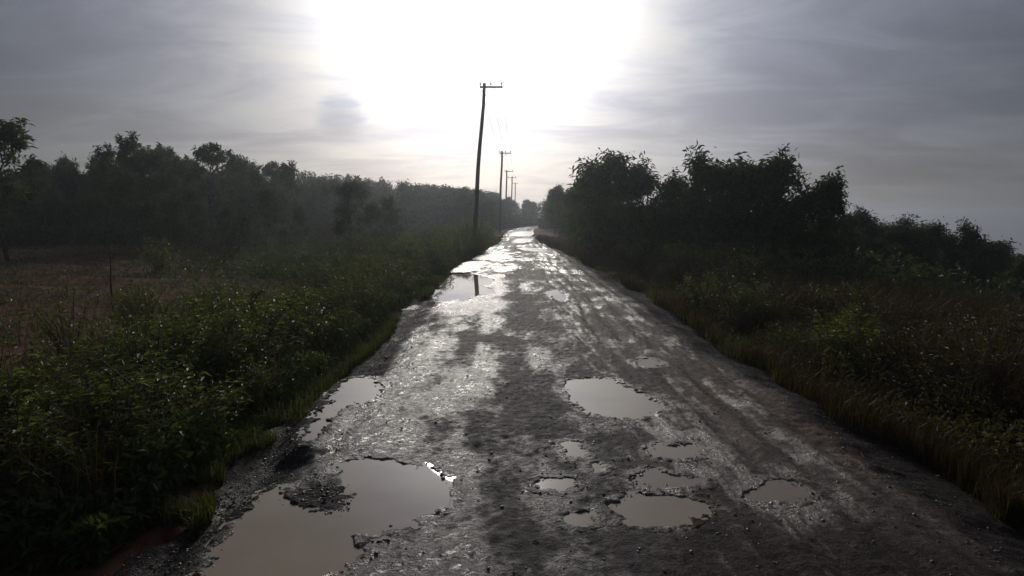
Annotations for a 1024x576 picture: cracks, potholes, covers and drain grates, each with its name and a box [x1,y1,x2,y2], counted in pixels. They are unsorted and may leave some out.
pothole [425,274,505,306]
pothole [625,466,720,496]
pothole [549,504,608,532]
pothole [549,436,597,465]
pothole [537,288,576,303]
pothole [293,375,392,448]
pothole [185,455,465,576]
pothole [729,476,820,509]
pothole [639,441,709,463]
pothole [556,376,673,421]
pothole [628,356,668,369]
pothole [523,473,587,496]
